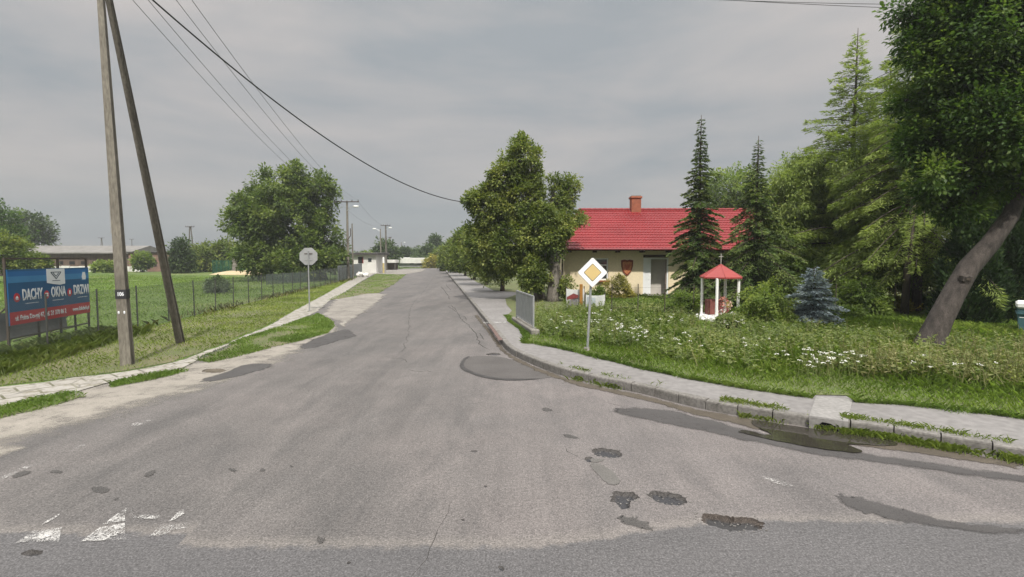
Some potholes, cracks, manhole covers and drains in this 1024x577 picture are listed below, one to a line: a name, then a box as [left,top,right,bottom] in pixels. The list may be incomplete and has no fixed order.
pothole [610,491,640,509]
pothole [646,490,687,506]
pothole [592,448,622,458]
crack [397,284,487,372]
pothole [701,513,765,532]
